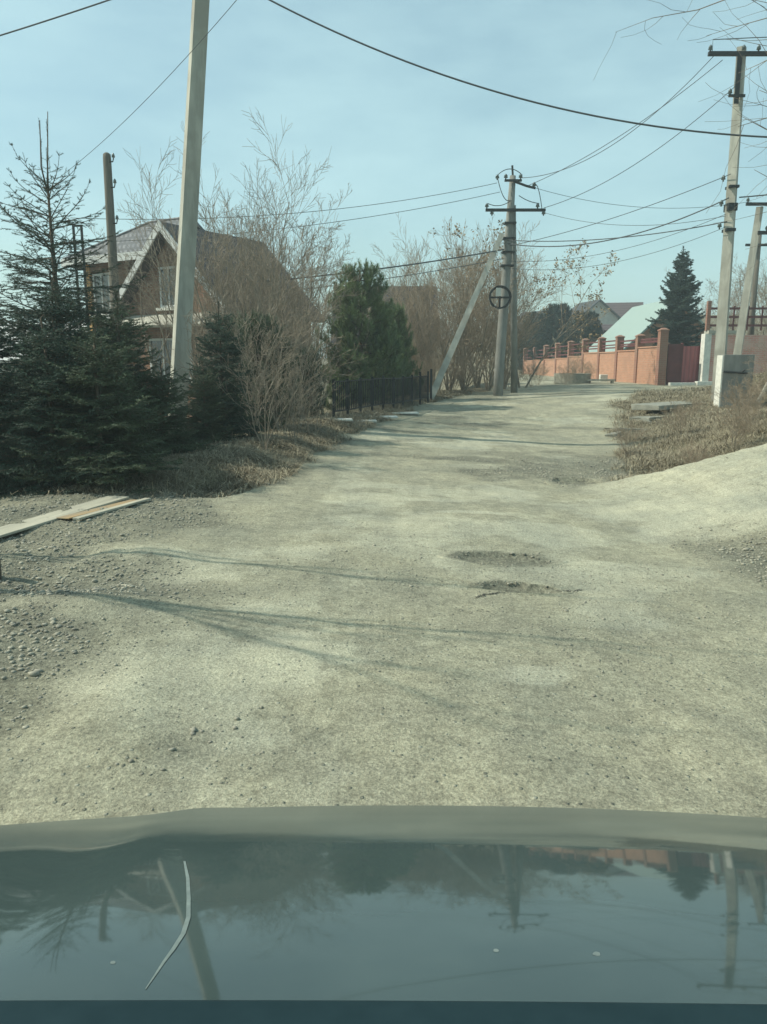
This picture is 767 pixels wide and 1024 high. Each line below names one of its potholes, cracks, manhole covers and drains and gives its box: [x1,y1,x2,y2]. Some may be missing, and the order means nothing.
pothole [437,550,568,567]
pothole [541,476,614,487]
pothole [467,580,573,595]
